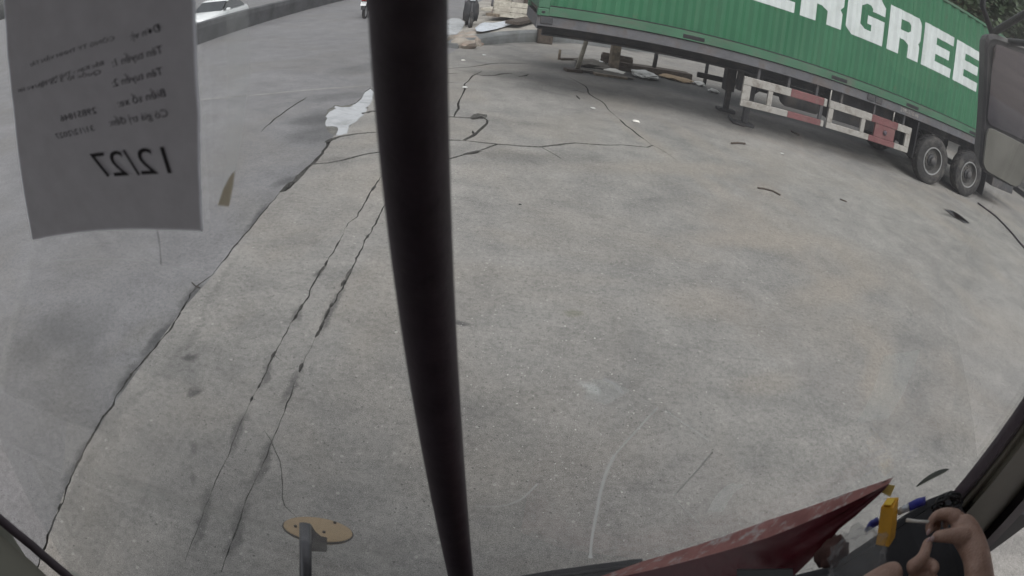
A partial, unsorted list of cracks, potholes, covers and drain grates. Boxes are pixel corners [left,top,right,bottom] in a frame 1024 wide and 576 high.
crack [185,63,672,561]
